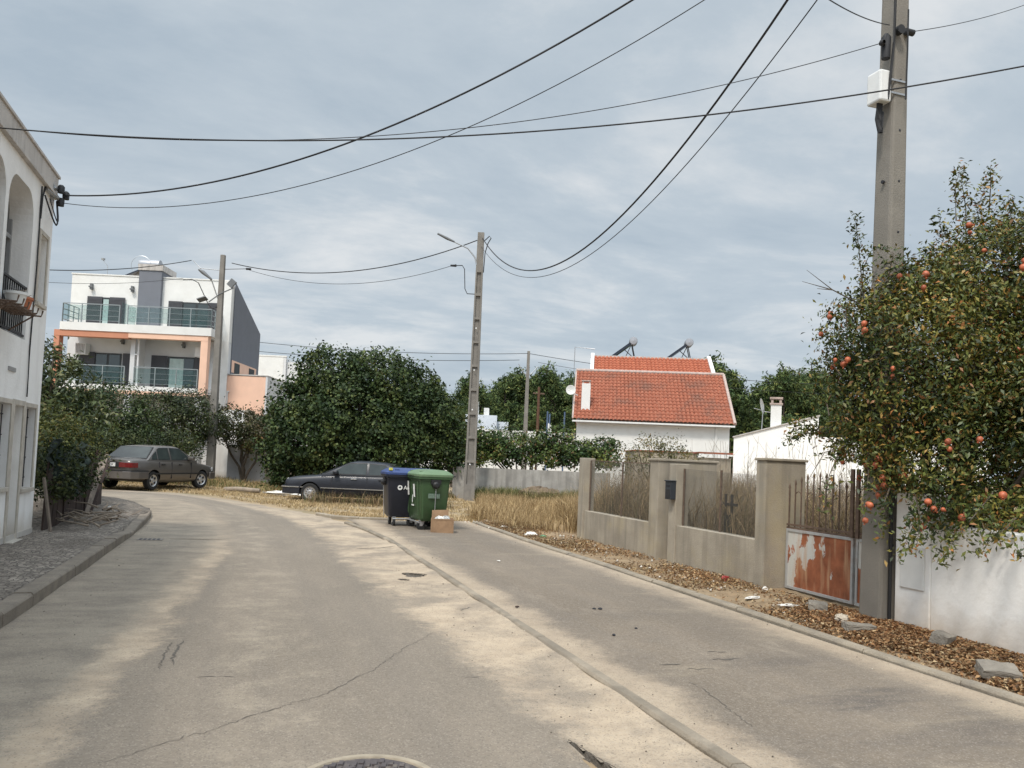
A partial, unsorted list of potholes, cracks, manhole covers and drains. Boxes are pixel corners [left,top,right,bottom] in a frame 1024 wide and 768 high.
crack [688,651,752,726]
manhole cover [308,754,431,768]
crack [87,633,431,764]
